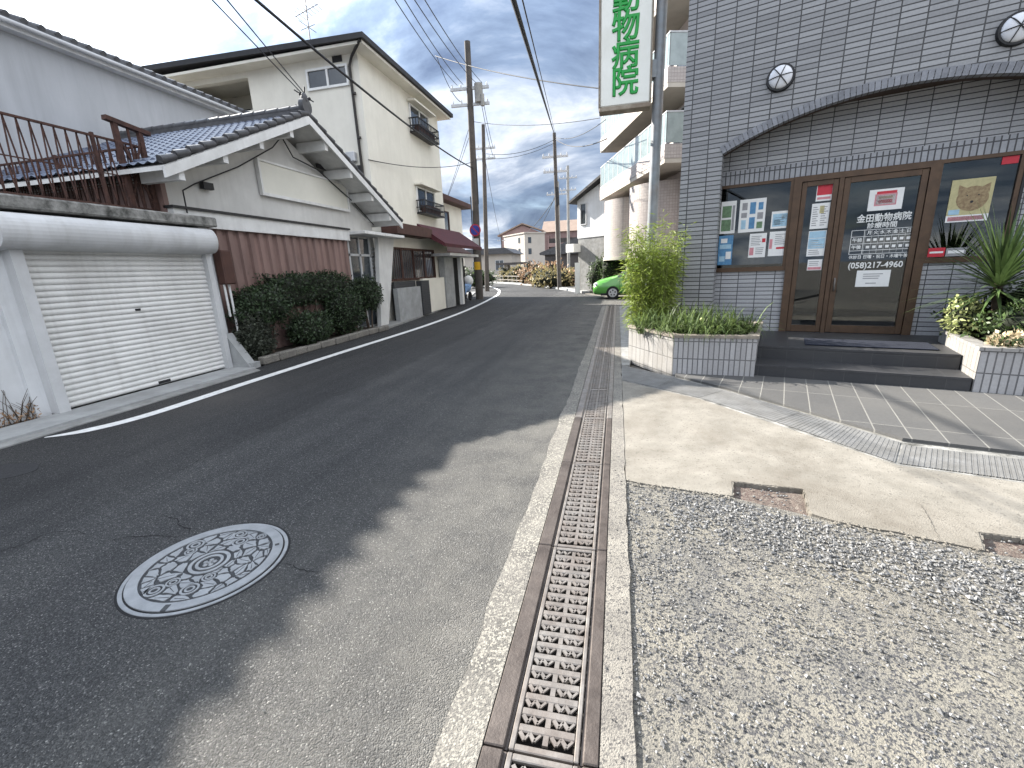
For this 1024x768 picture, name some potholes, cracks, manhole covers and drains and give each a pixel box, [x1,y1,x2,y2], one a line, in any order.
drain grate [598,329,615,337]
drain grate [593,344,615,356]
drain grate [575,389,613,419]
crack [105,514,191,541]
drain grate [583,369,614,390]
drain grate [477,745,588,768]
drain grate [540,462,610,552]
drain grate [563,417,612,465]
manhole cover [114,523,291,620]
drain grate [596,336,615,345]
drain grate [589,355,614,370]
